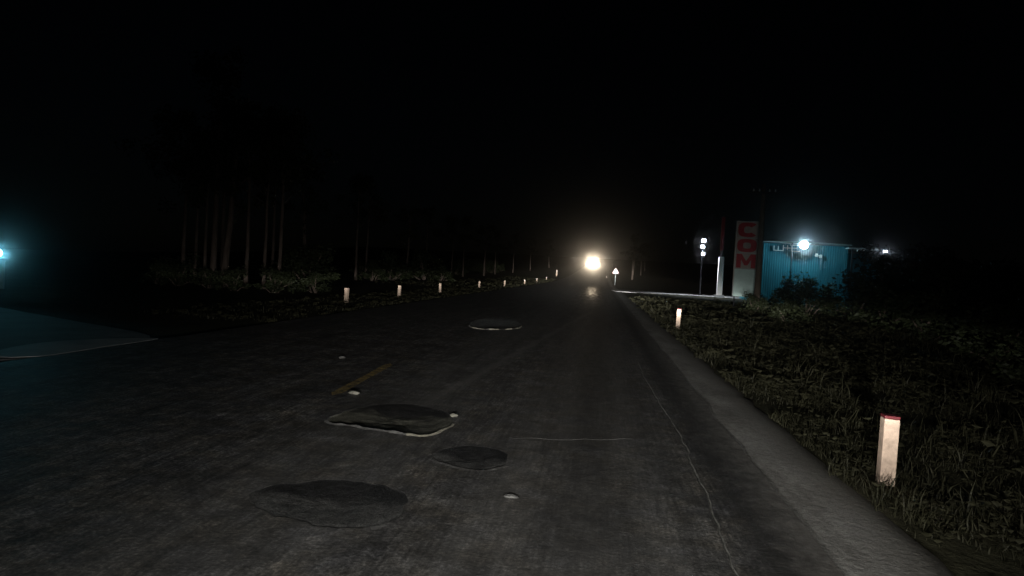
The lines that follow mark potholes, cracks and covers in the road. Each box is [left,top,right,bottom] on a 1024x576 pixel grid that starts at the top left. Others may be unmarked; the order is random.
pothole [324,403,455,437]
pothole [428,445,510,472]
crack [638,364,739,576]
pothole [468,318,522,330]
